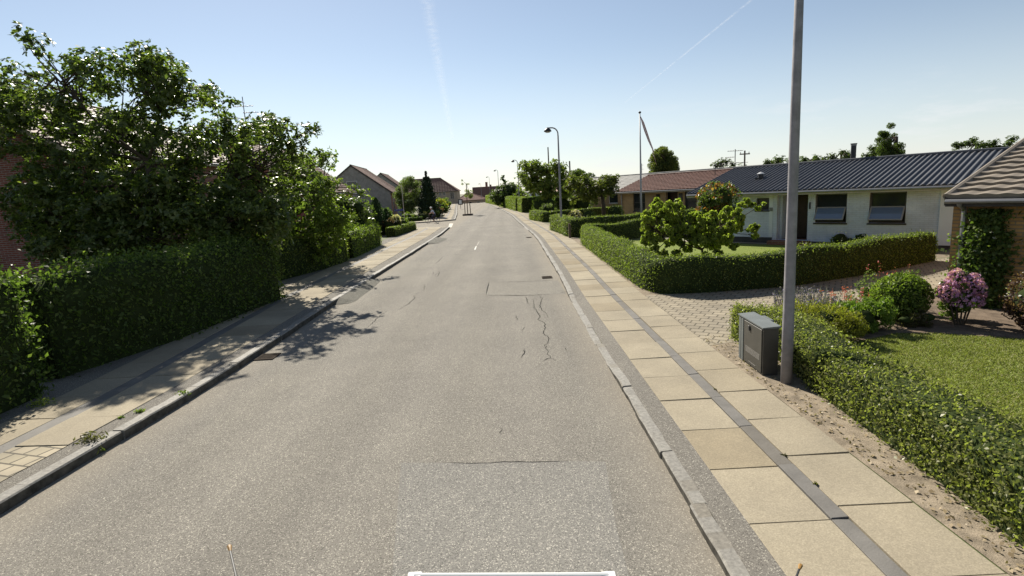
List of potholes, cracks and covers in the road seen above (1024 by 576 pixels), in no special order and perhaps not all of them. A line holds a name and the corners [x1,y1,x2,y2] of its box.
crack [516,296,566,360]
drain grate [253,353,281,361]
